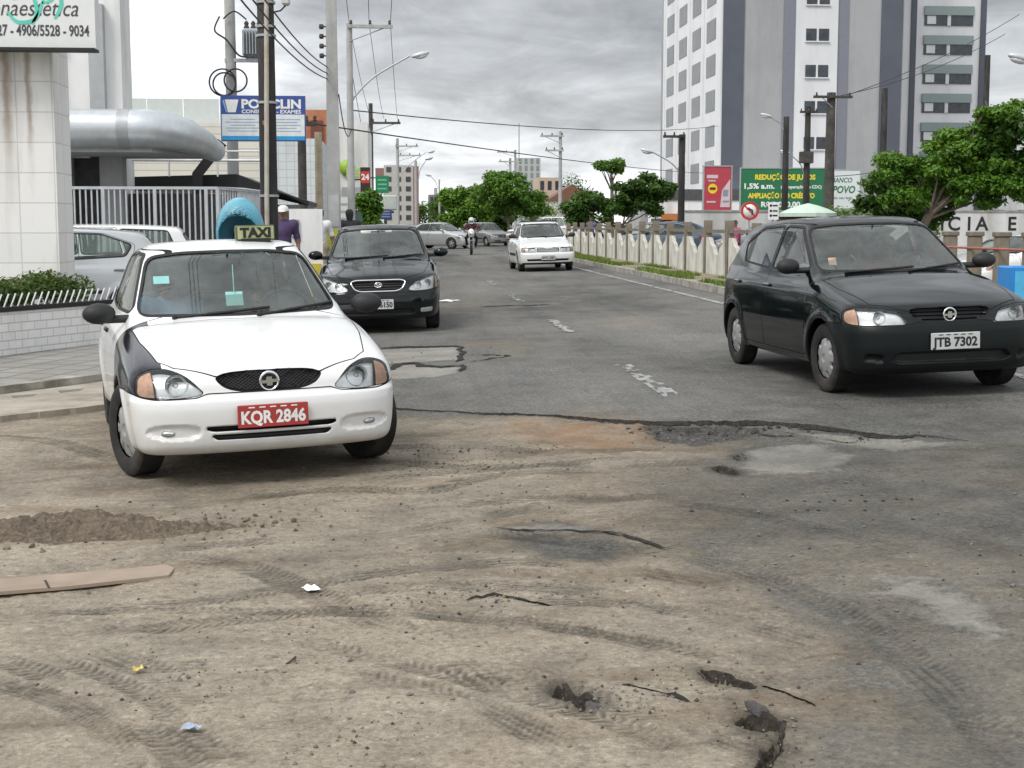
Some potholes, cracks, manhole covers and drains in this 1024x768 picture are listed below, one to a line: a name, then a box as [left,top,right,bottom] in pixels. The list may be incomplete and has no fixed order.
pothole [734,711,787,733]
crack [496,527,675,548]
crack [762,686,816,706]
pothole [642,425,758,446]
pothole [711,466,740,476]
crack [467,592,553,606]
crack [622,683,691,703]
crack [396,407,968,443]
pothole [697,669,757,690]
pothole [552,683,600,712]
